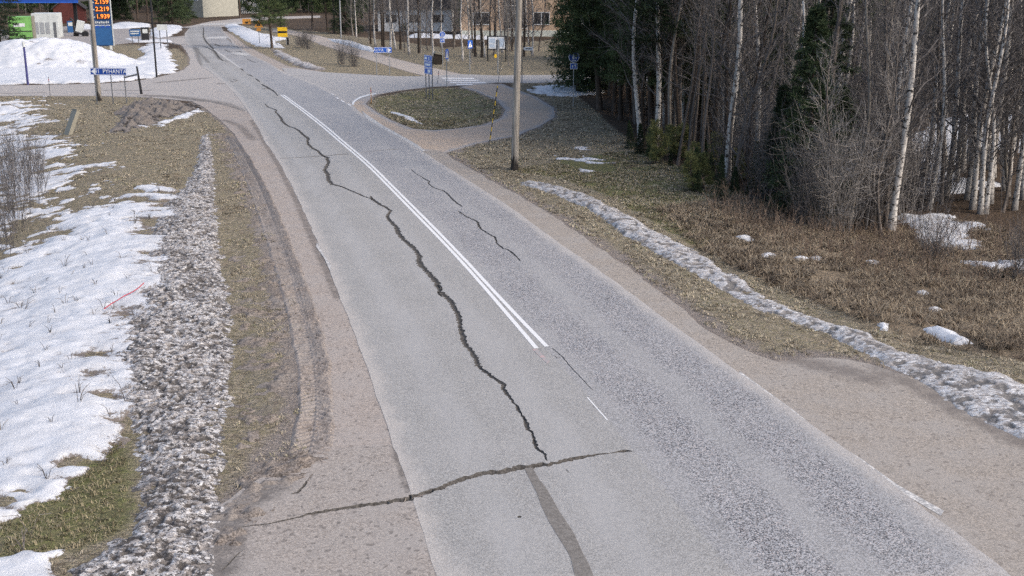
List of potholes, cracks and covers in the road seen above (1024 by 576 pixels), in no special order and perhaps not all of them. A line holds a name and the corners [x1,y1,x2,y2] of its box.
crack [180,29,633,528]
